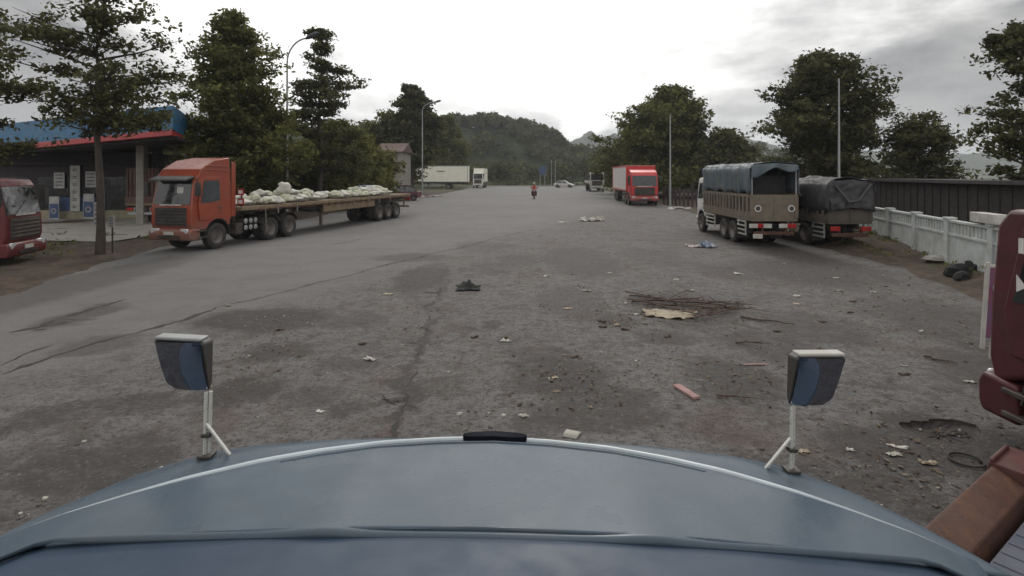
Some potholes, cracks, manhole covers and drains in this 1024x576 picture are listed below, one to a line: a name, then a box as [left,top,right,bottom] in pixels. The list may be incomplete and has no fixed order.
crack [377,267,459,438]
pothole [899,419,981,444]
crack [2,299,125,365]
